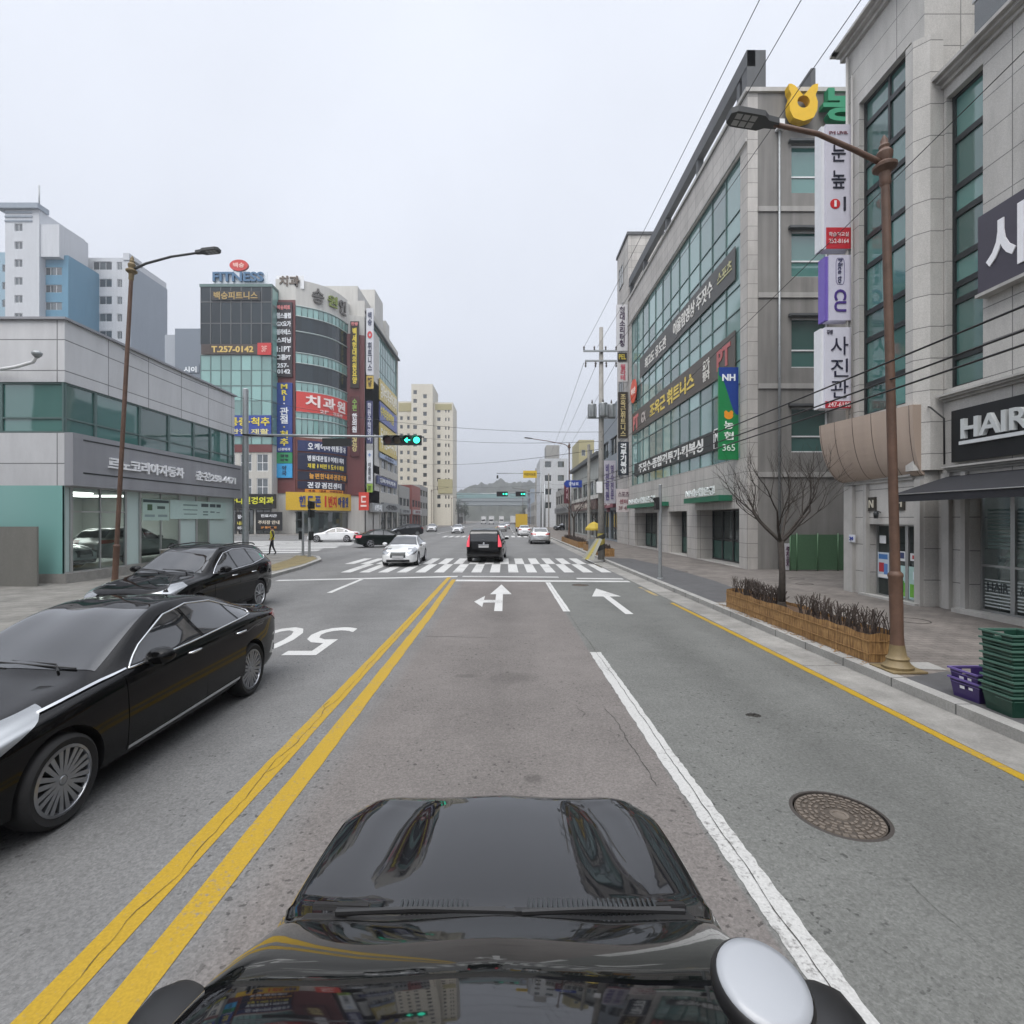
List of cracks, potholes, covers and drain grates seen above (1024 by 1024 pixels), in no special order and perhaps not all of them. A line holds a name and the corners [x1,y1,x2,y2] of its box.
manhole cover [789,791,895,842]
